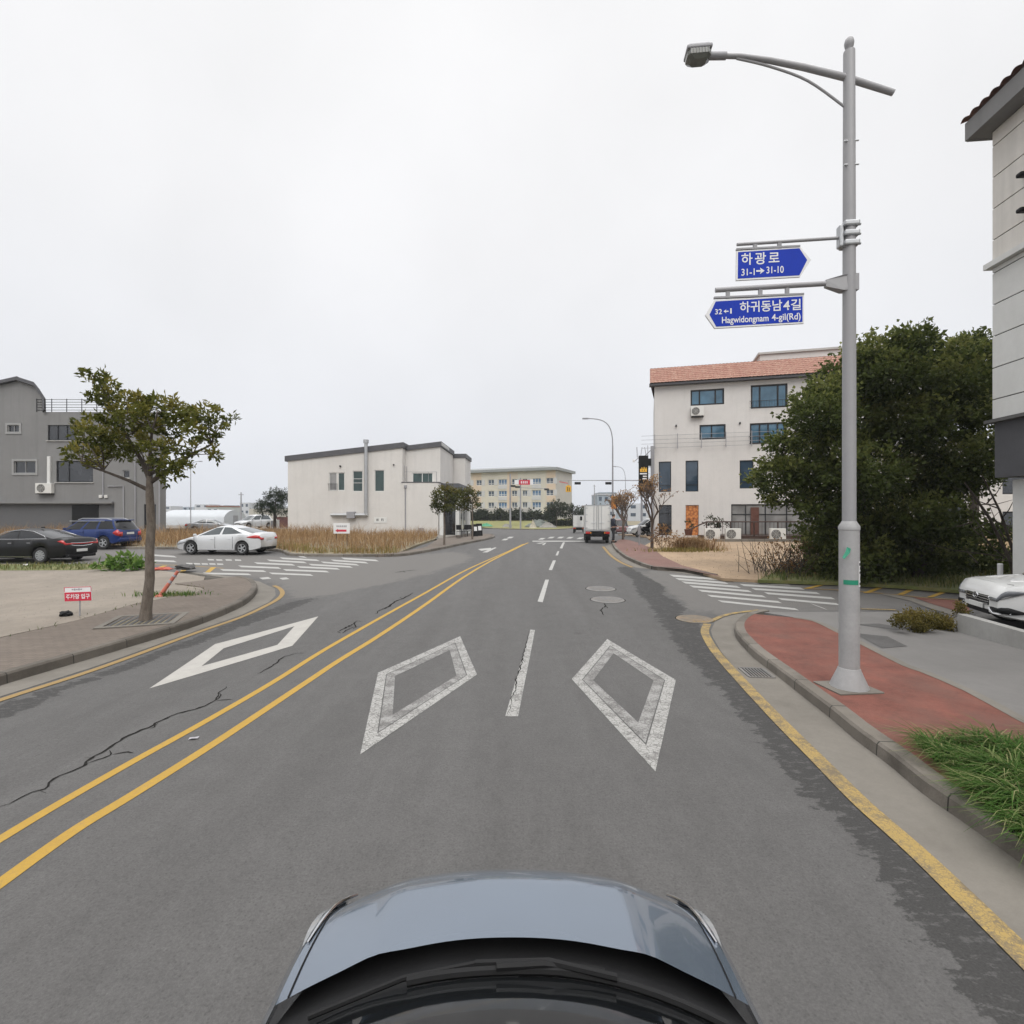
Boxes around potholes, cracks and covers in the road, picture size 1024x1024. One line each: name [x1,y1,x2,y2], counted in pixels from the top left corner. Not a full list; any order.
drain grate [738,667,776,679]
crack [2,686,230,806]
crack [507,634,529,714]
manhole cover [675,615,714,623]
